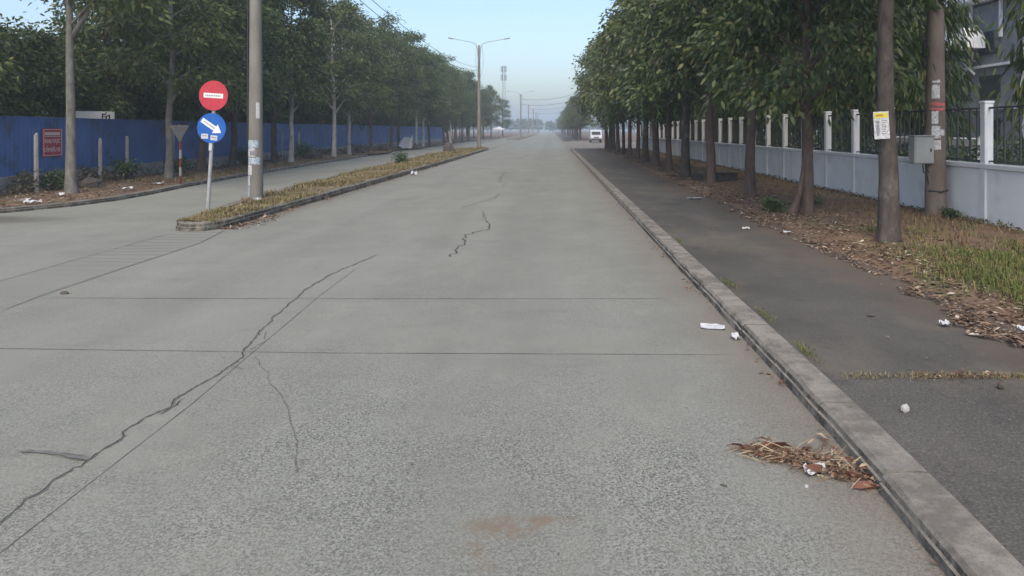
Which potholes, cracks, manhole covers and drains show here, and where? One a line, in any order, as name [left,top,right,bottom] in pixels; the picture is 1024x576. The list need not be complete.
crack [449,174,504,256]
crack [0,255,375,524]
